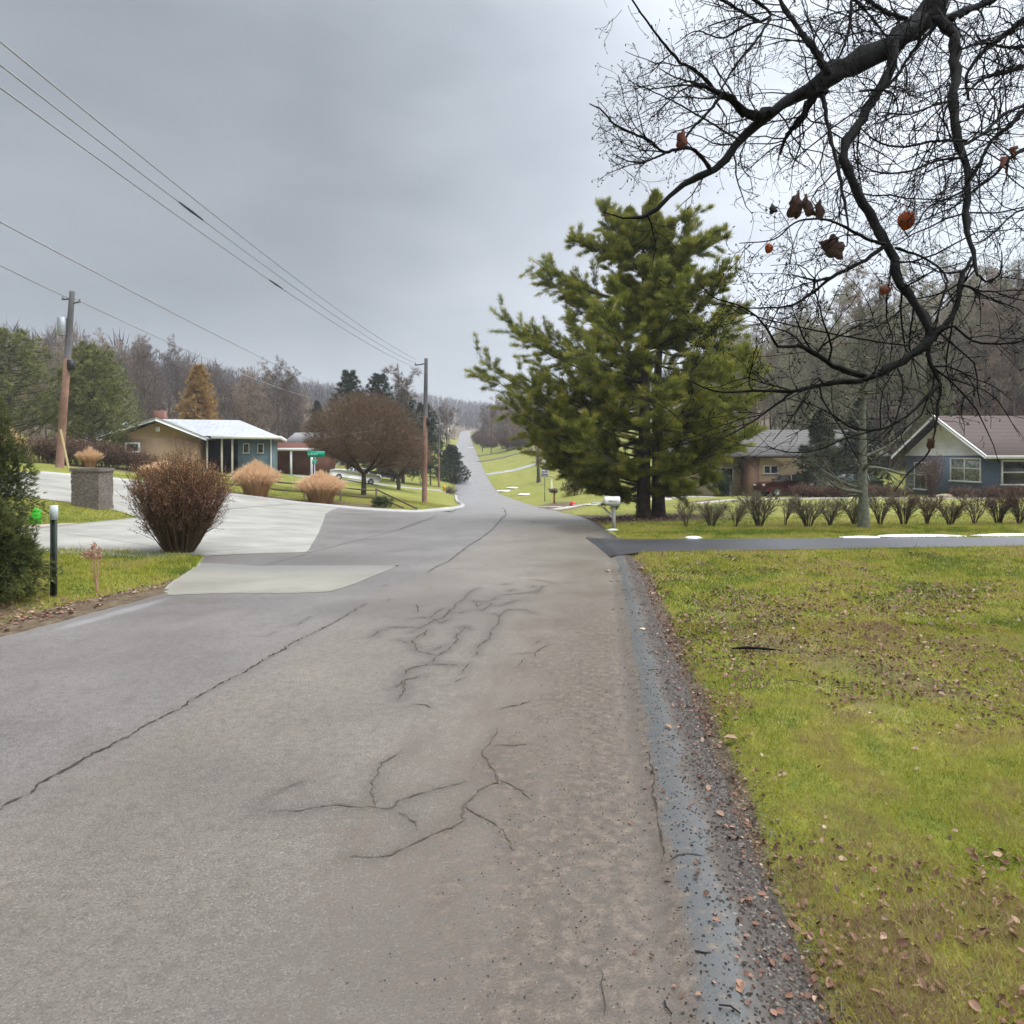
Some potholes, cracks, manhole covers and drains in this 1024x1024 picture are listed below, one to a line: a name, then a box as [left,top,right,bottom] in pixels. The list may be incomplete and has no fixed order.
crack [597,965,606,1015]
crack [648,752,704,863]
crack [374,582,552,708]
crack [277,730,530,857]
